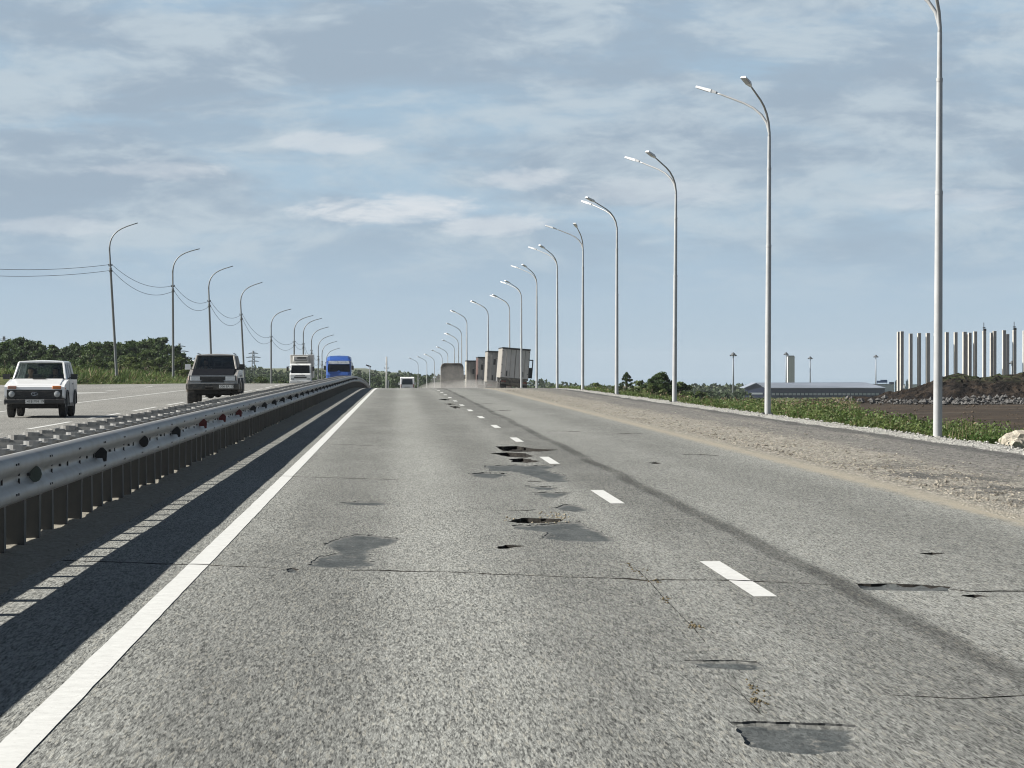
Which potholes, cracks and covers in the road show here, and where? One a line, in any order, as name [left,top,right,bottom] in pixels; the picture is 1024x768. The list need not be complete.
pothole [504,511,573,524]
crack [63,557,1024,715]
